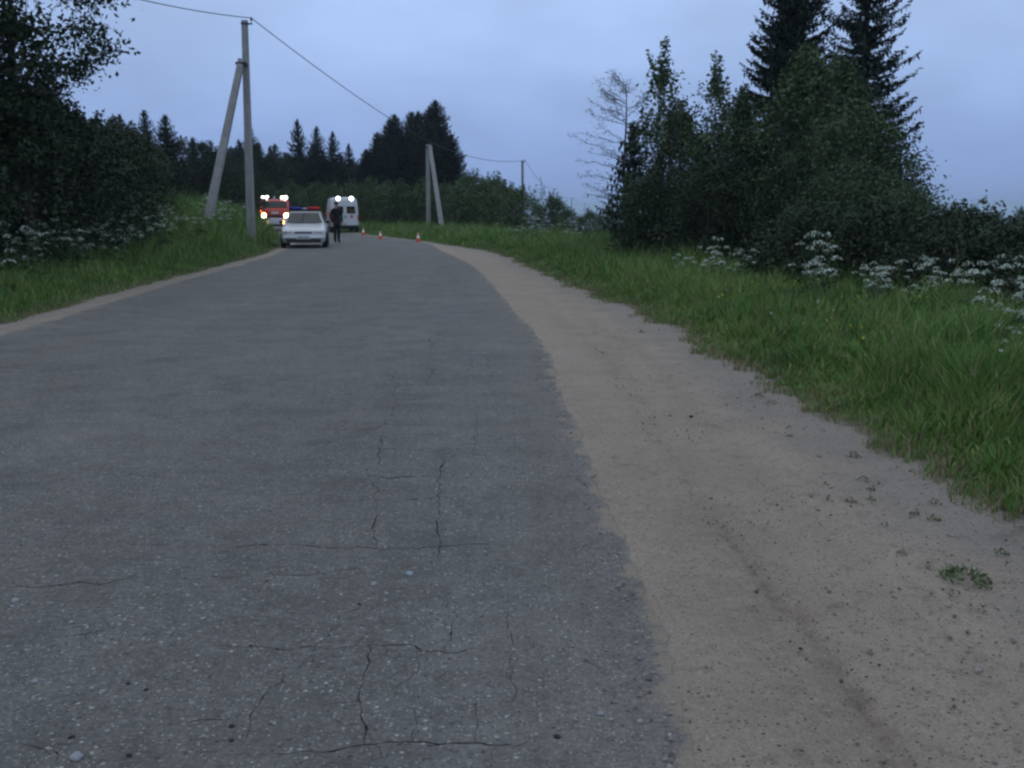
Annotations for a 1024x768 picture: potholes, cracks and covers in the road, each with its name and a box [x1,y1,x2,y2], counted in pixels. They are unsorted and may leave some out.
crack [267,567,369,576]
crack [180,603,530,758]
crack [22,573,138,588]
